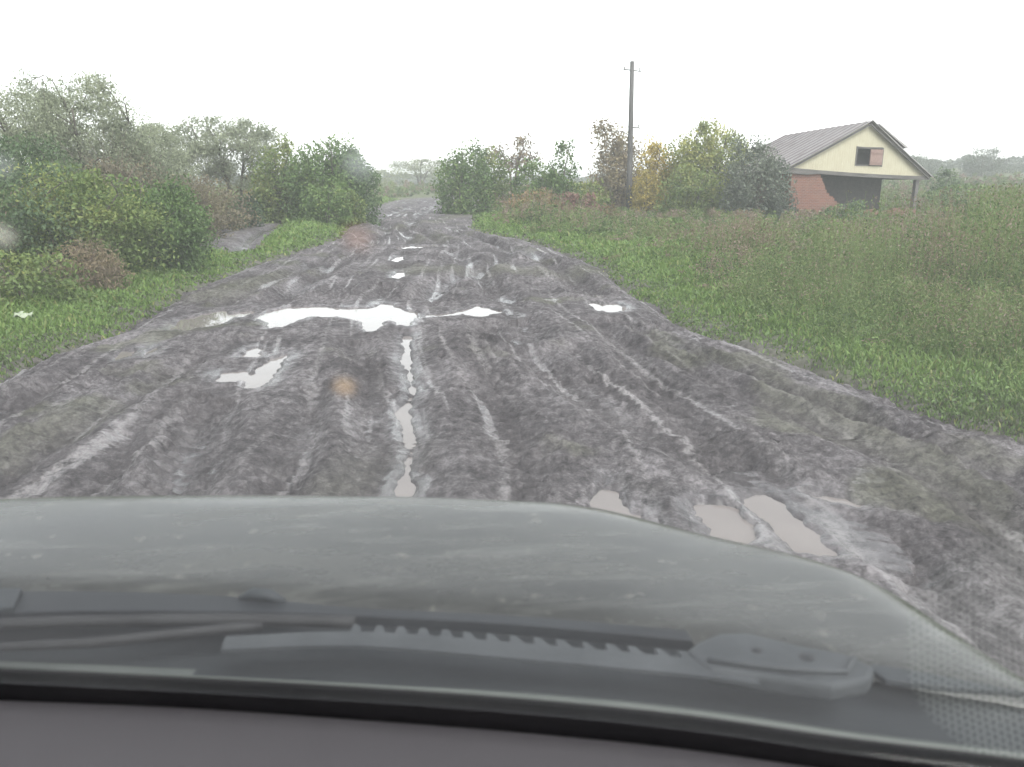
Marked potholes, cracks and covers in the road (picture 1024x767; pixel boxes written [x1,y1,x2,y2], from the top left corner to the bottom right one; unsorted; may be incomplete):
pothole [210,350,296,389]
pothole [421,303,508,318]
pothole [734,483,851,558]
pothole [584,301,632,312]
pothole [684,491,768,545]
pothole [252,301,425,332]
